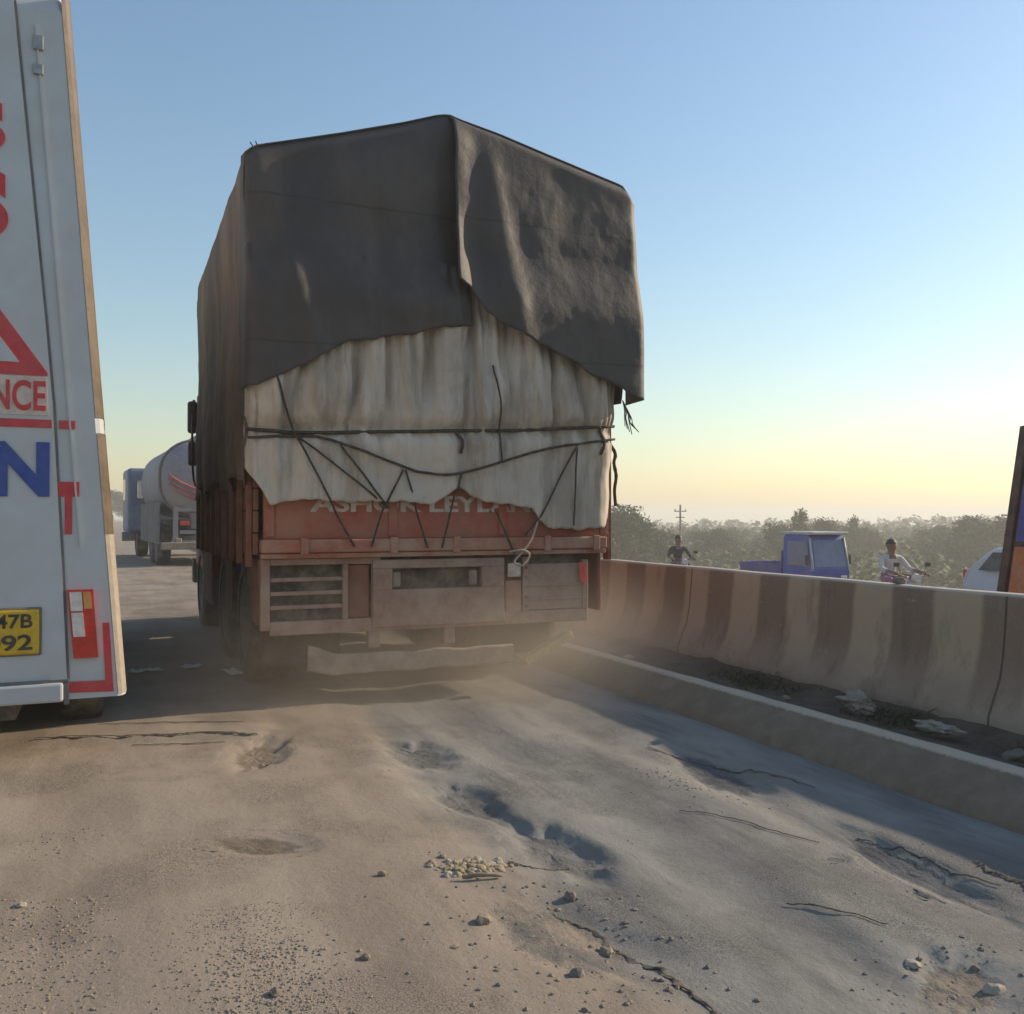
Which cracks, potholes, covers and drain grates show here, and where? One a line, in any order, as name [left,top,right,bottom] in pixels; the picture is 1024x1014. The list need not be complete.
pothole [214,730,292,775]
pothole [487,820,619,892]
pothole [180,829,321,859]
pothole [361,740,464,775]
crack [33,721,258,746]
crack [553,914,720,1014]
crack [786,903,887,924]
pothole [414,784,514,827]
crack [679,810,819,843]
crack [857,838,1001,886]
